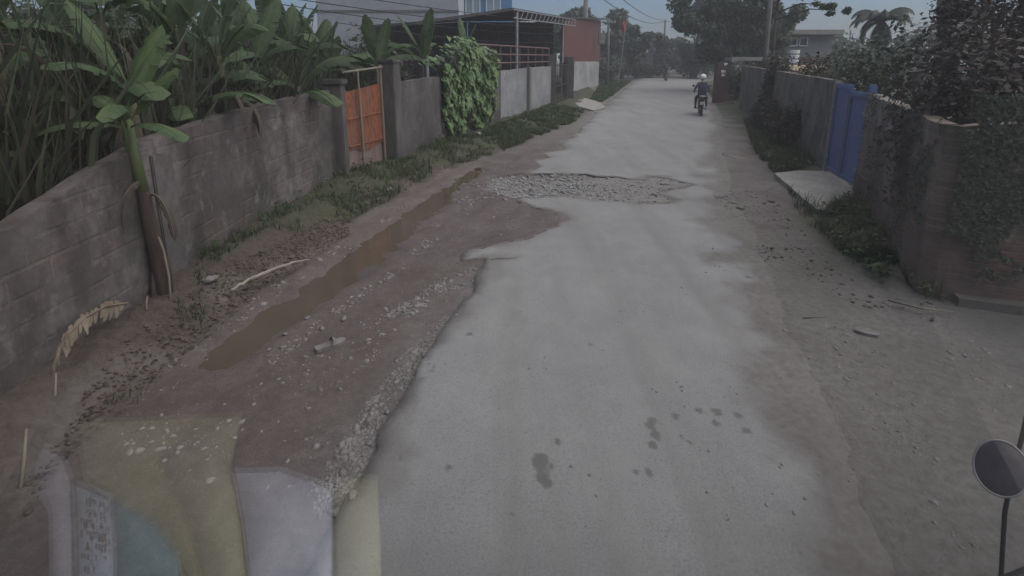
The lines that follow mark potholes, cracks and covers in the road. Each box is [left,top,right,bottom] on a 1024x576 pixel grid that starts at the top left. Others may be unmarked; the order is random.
pothole [486,173,692,202]
